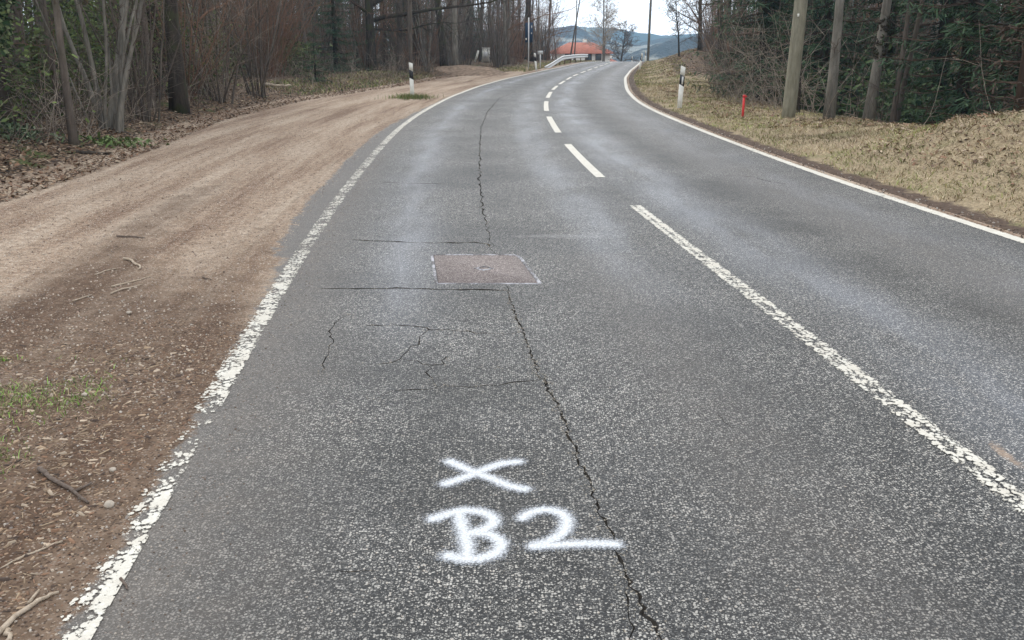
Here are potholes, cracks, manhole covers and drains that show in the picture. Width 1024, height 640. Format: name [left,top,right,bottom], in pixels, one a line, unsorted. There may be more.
manhole cover [431,254,541,285]
crack [318,287,666,640]
